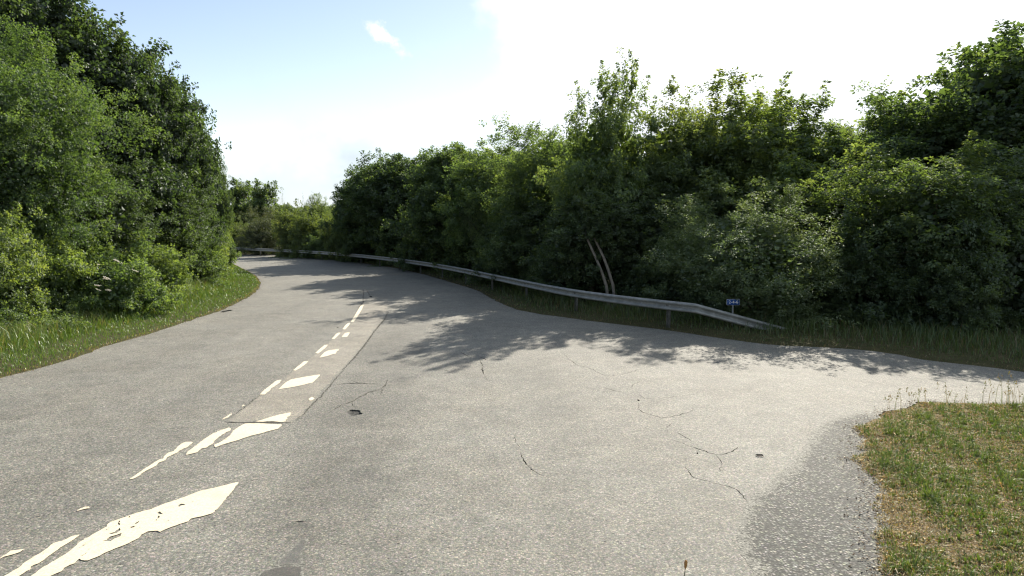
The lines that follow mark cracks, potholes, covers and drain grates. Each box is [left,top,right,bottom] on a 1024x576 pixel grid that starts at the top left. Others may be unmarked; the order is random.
crack [573,362,747,501]
crack [330,381,387,412]
